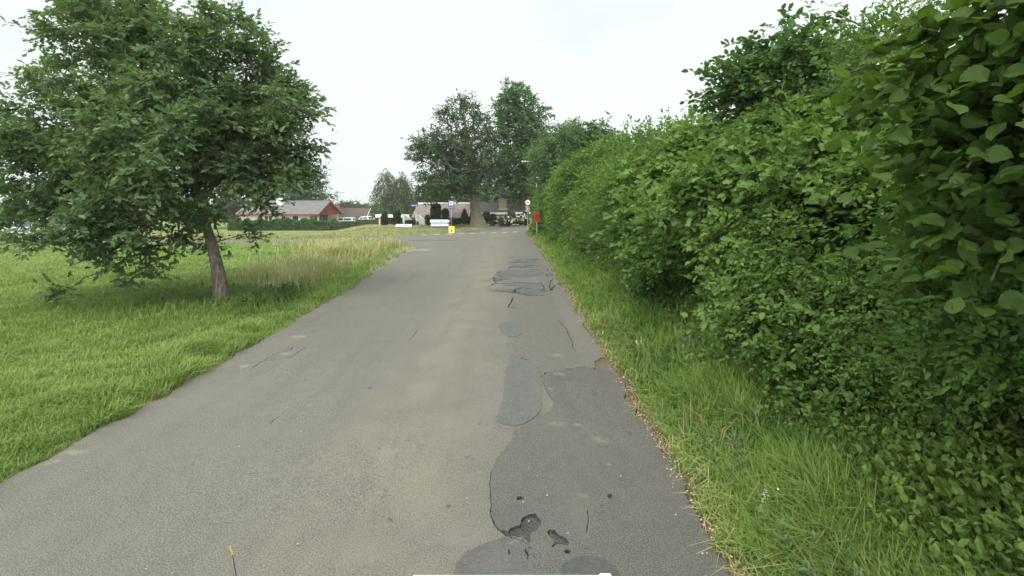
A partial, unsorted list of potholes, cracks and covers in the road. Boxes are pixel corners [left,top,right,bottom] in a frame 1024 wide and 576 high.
pothole [501,513,541,542]
crack [490,259,556,309]
pothole [547,530,569,547]
